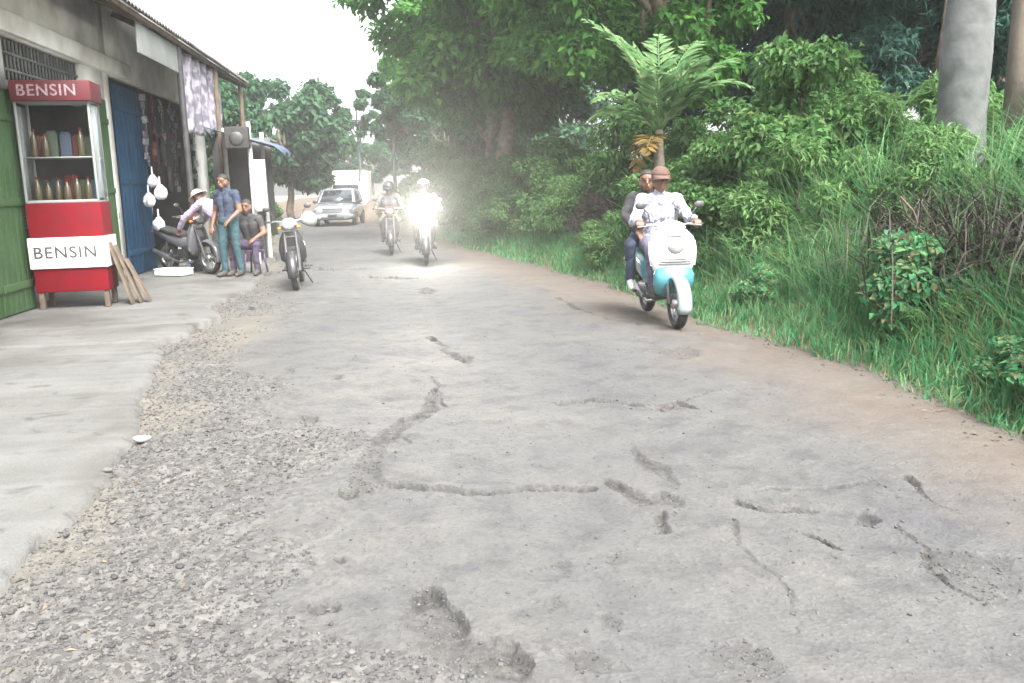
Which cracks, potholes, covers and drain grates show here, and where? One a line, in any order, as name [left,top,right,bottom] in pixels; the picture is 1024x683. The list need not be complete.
crack [729,474,963,644]
crack [389,478,599,496]
crack [553,388,721,412]
crack [425,336,462,407]
pothole [397,582,536,683]
